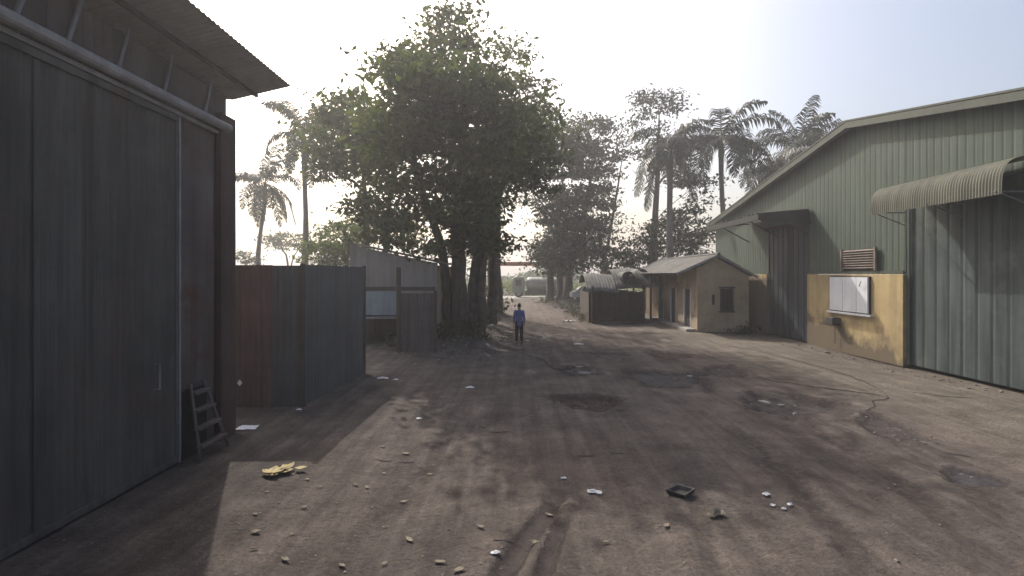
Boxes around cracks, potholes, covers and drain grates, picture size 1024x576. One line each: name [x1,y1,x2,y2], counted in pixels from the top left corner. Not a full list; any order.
pothole [554,396,620,412]
pothole [743,392,848,416]
pothole [623,371,702,388]
pothole [857,413,919,441]
pothole [942,466,1006,488]
crack [637,337,970,411]
crack [526,354,591,376]
